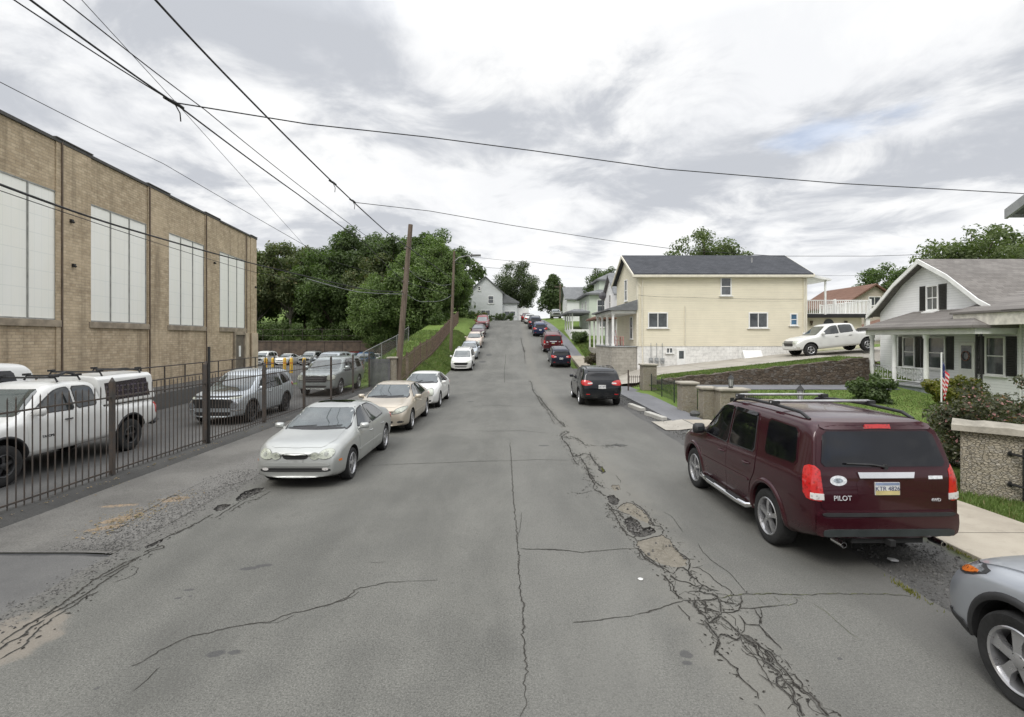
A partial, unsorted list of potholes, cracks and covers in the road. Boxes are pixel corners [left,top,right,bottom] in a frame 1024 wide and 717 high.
pothole [624,516,656,537]
crack [390,339,911,717]
pothole [236,488,264,501]
crack [0,462,429,690]
